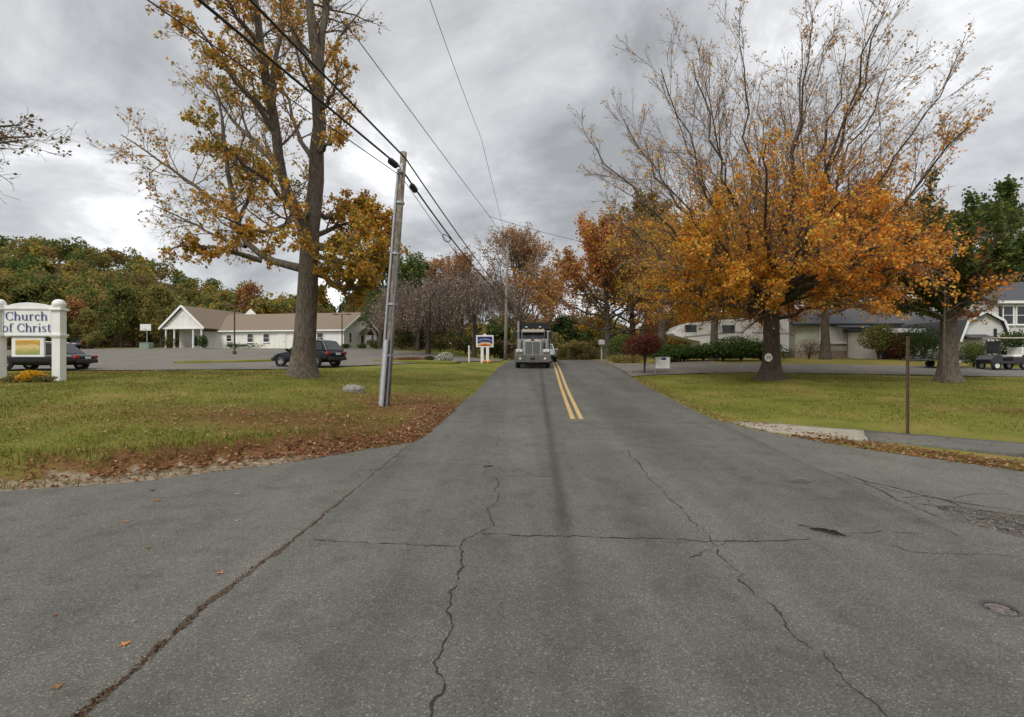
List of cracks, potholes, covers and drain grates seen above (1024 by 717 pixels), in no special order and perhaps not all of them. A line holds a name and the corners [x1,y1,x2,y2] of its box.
crack [808,464,1023,557]
crack [293,432,888,717]
pothole [809,527,849,538]
manhole cover [978,599,1023,617]
